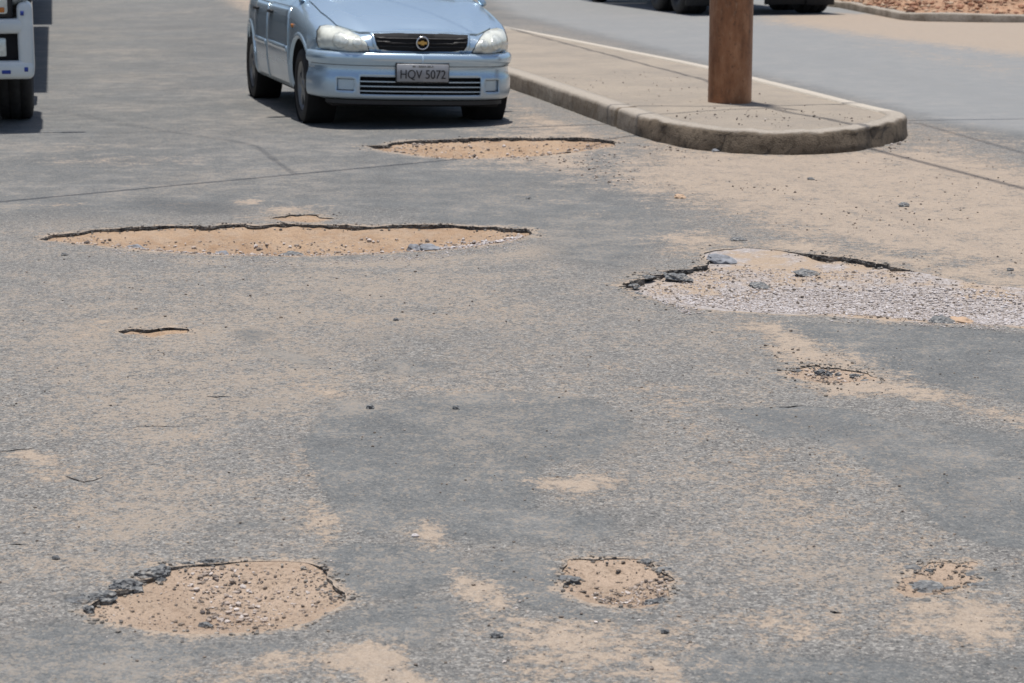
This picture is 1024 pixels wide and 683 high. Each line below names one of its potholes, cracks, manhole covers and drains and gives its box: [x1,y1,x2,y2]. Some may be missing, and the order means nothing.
pothole [64,558,346,634]
pothole [786,365,877,384]
pothole [40,224,532,257]
pothole [368,137,616,159]
pothole [895,561,986,597]
pothole [622,248,1024,328]
pothole [556,558,675,608]
